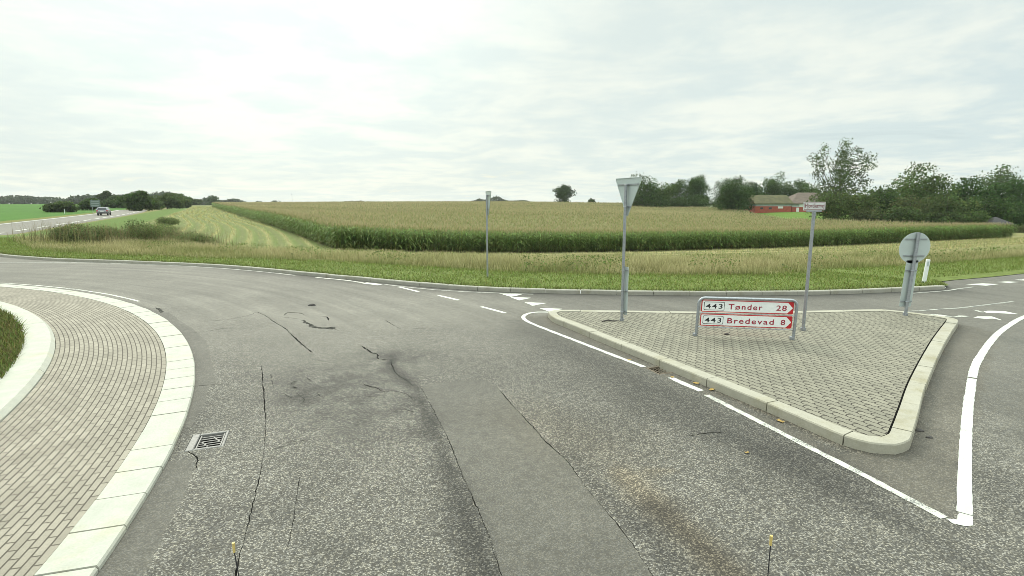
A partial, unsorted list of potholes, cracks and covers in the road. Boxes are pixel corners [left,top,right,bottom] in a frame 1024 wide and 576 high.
crack [362,346,413,412]
crack [195,312,339,402]
crack [220,366,310,576]
drain grate [184,430,230,452]
